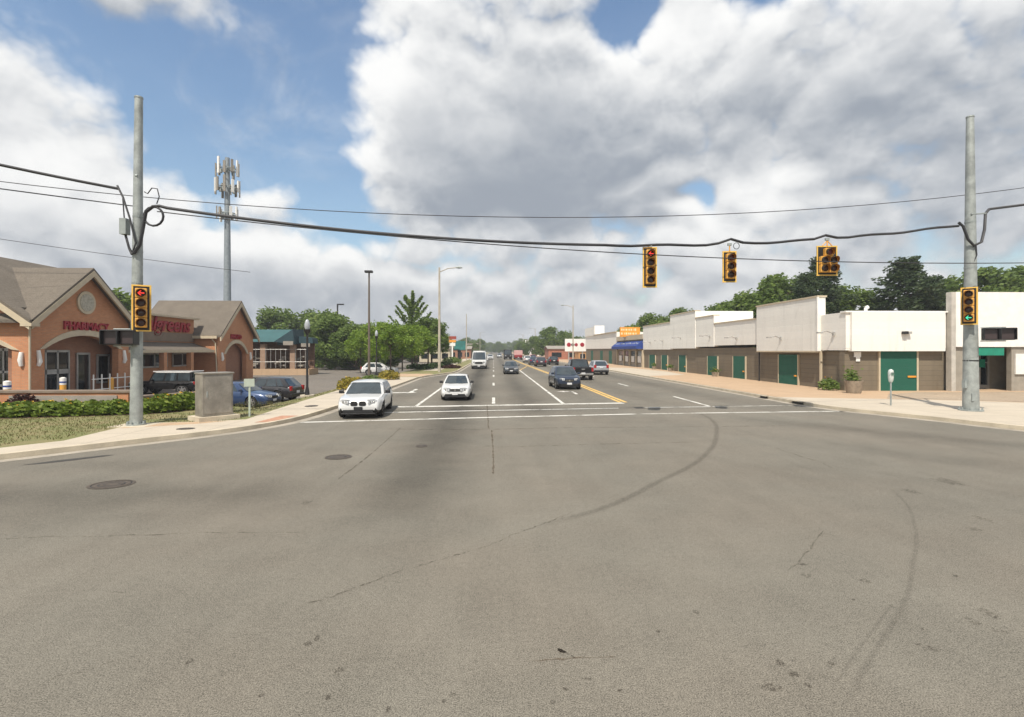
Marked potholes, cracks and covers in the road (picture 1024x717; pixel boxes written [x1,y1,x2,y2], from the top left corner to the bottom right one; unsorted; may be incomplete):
manhole cover [86,479,136,489]
